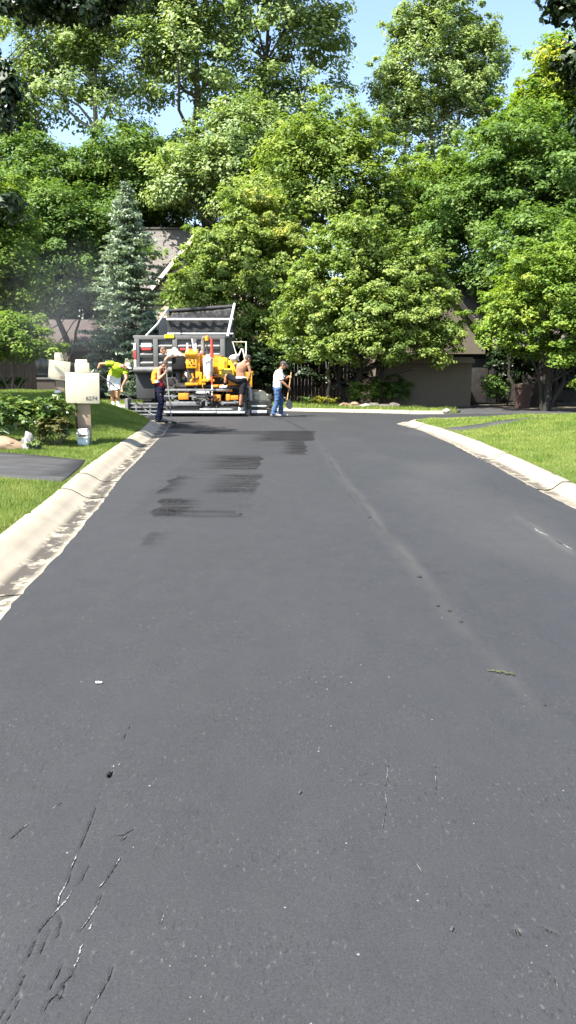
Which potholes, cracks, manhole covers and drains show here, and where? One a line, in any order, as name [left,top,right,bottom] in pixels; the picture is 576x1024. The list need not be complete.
crack [0,808,121,1024]
